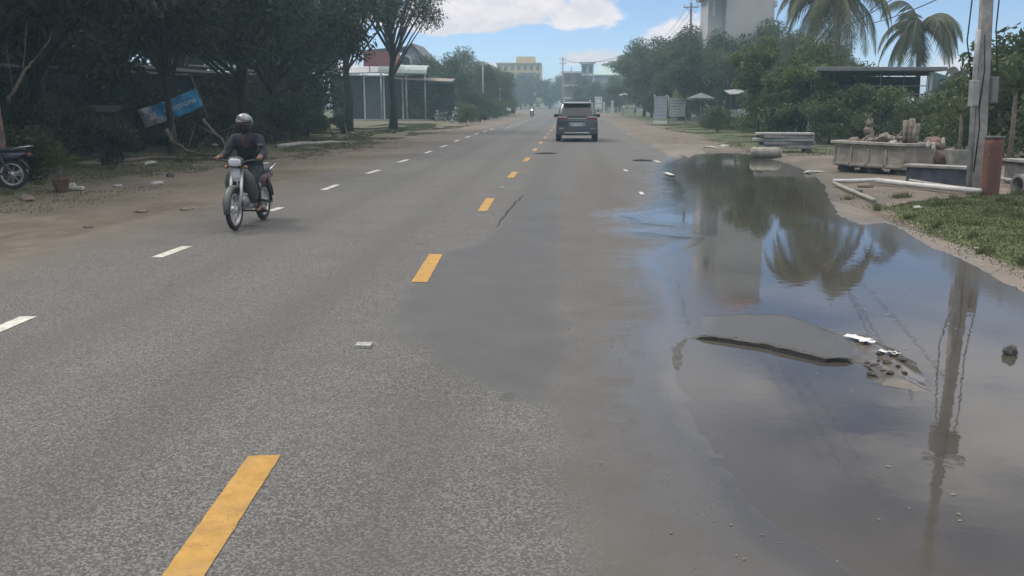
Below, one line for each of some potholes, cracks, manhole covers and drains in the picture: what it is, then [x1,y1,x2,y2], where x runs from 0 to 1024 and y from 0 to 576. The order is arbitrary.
pothole [672,334,891,385]
